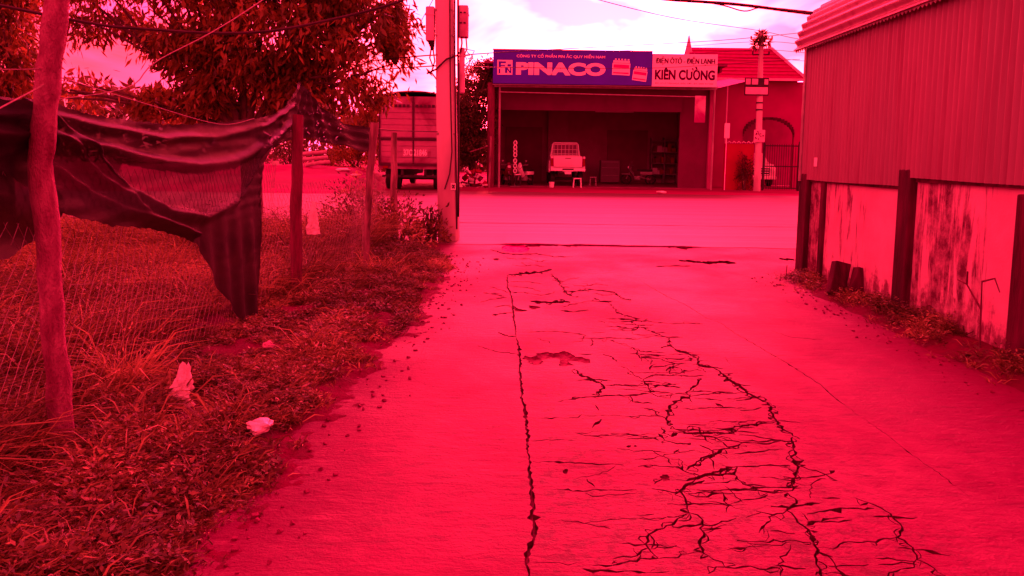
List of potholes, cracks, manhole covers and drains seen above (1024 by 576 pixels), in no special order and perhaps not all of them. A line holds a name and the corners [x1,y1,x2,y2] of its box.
crack [479,245,962,576]
pothole [522,351,590,366]
